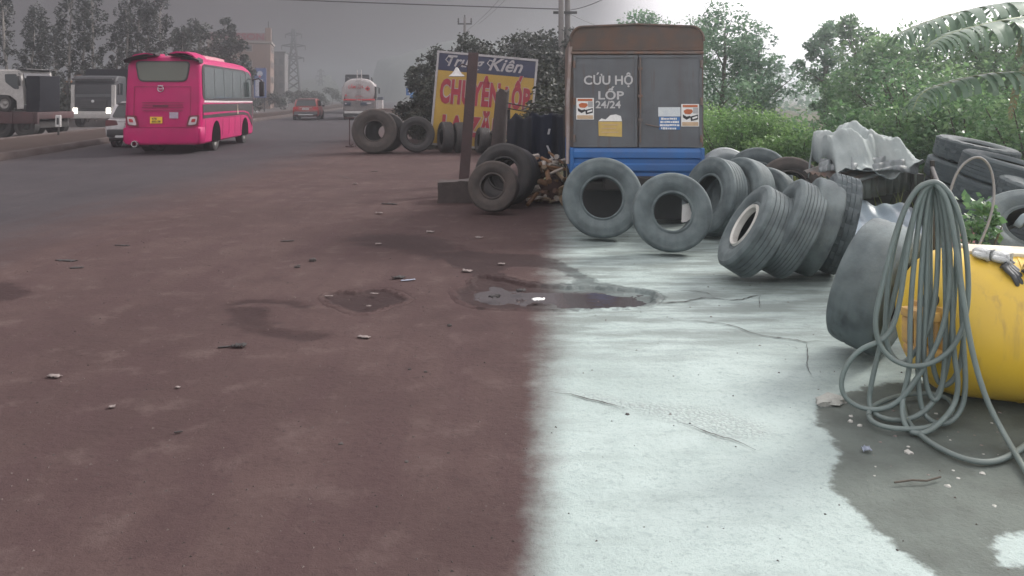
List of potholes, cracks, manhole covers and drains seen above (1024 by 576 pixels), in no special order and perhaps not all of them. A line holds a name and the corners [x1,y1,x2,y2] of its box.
crack [650,290,761,307]
crack [551,391,756,450]
pothole [317,288,414,316]
pothole [448,274,664,312]
crack [697,320,824,374]
